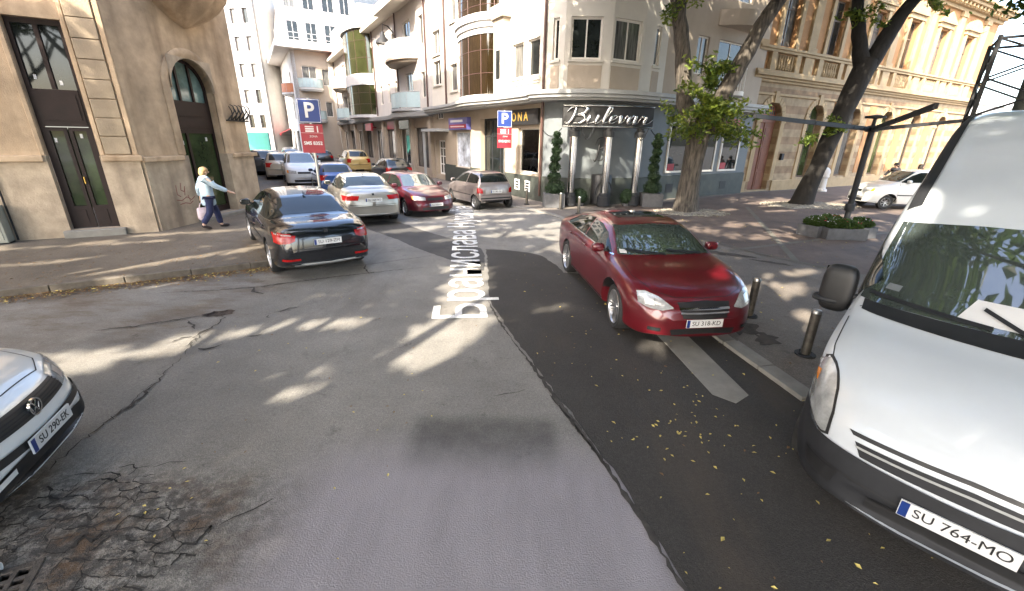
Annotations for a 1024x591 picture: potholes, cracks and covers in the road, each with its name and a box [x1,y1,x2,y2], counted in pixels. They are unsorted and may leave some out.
drain grate [0,557,46,591]
crack [0,314,272,591]
